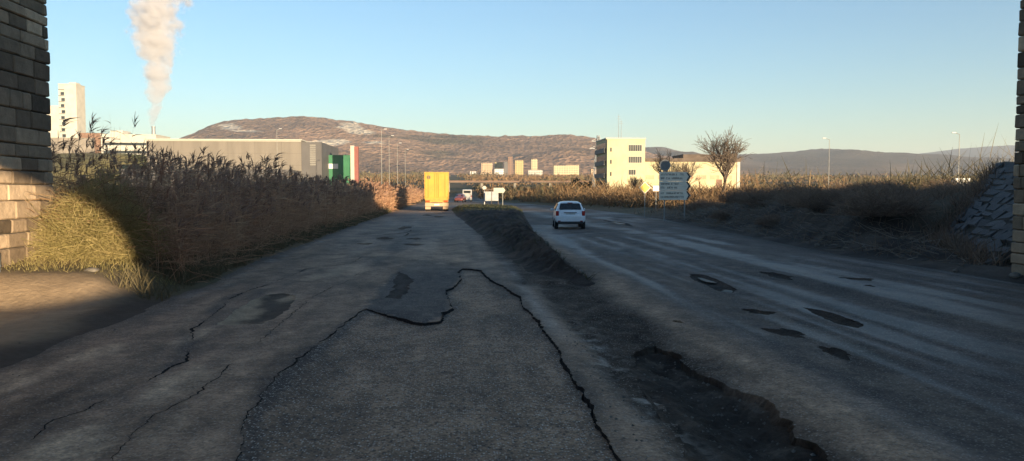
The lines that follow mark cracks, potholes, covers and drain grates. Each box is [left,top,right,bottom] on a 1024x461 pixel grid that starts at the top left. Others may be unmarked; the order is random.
pothole [761,328,806,338]
crack [9,257,621,461]
pothole [690,274,737,293]
pothole [805,308,864,328]
pothole [630,346,829,461]
pothole [760,271,793,280]
pothole [385,272,414,299]
pothole [217,293,296,325]
pothole [818,346,851,361]
